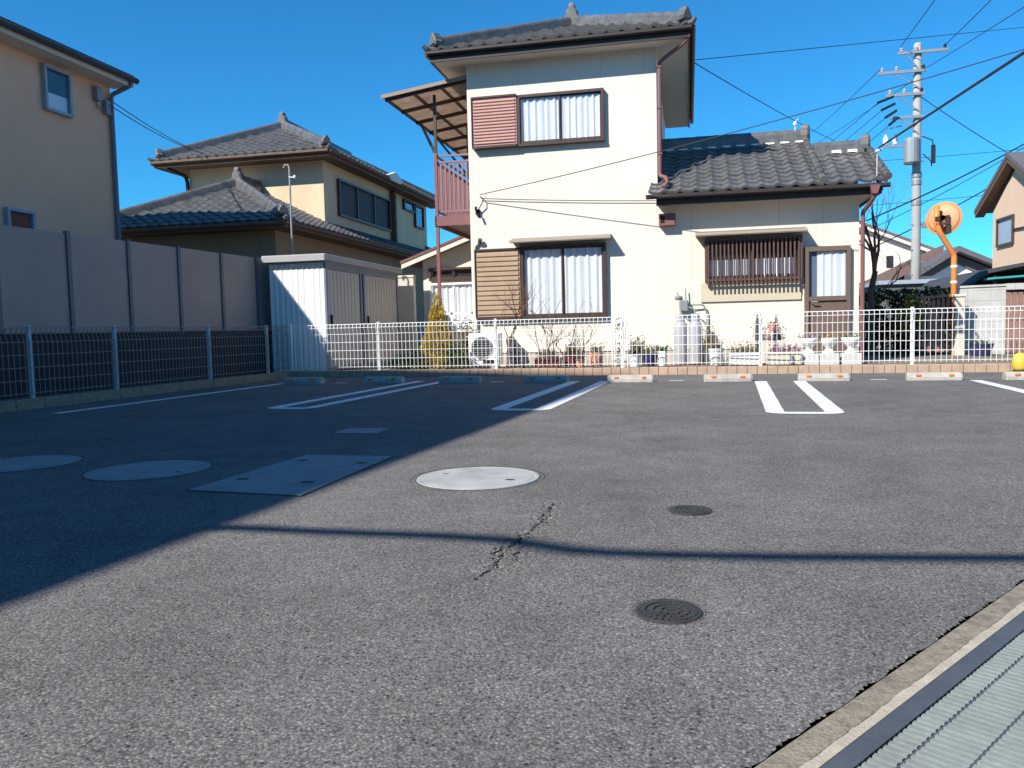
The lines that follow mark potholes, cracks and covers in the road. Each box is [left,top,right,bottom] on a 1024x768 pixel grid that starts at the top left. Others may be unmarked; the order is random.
manhole cover [667,505,714,516]
manhole cover [81,460,214,481]
manhole cover [0,455,84,473]
drain grate [820,611,1024,768]
manhole cover [411,466,545,491]
crack [469,503,560,580]
manhole cover [632,599,706,625]
